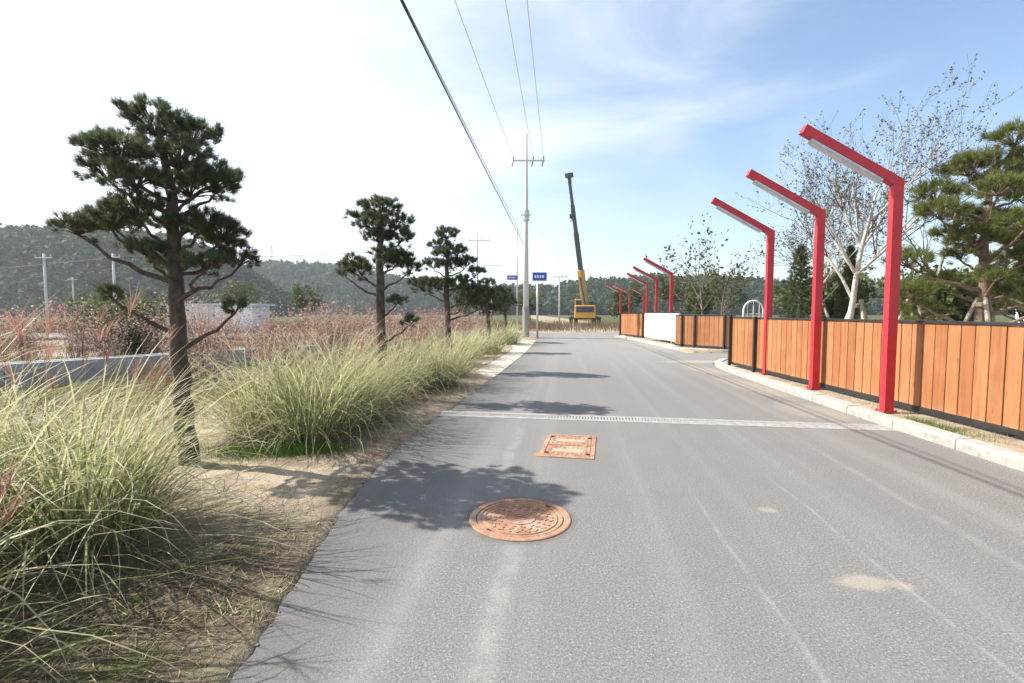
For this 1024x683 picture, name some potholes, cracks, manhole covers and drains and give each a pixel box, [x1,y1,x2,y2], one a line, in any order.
manhole cover [534,434,596,460]
manhole cover [469,498,571,542]
